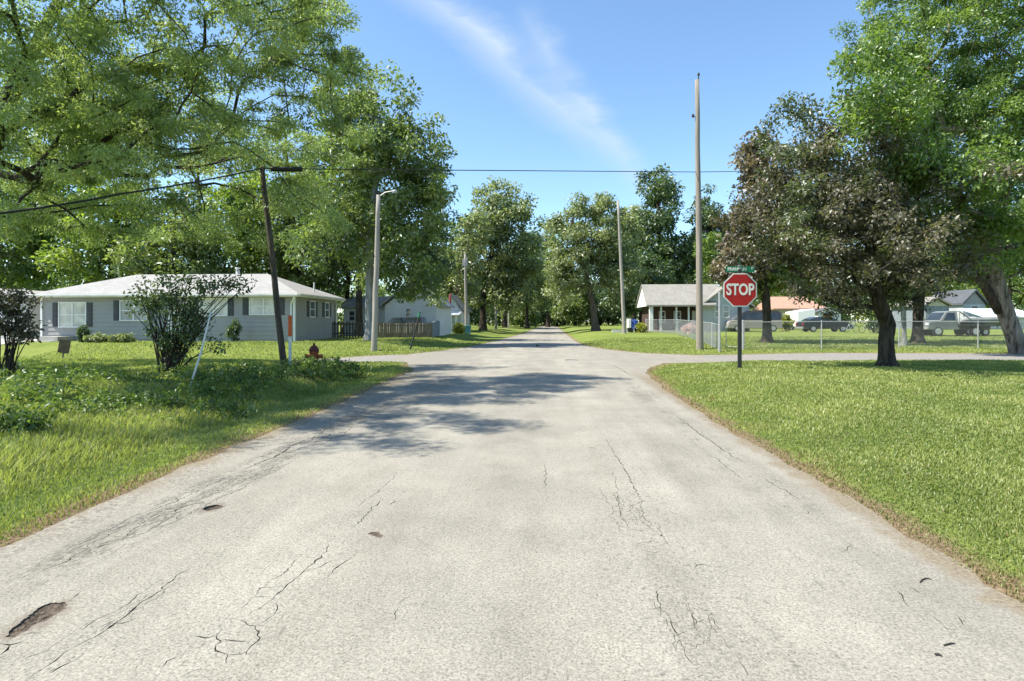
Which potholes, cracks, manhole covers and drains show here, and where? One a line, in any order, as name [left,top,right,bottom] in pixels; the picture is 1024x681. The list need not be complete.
crack [25,570,186,679]
crack [675,415,743,477]
crack [654,587,748,677]
crack [24,424,351,577]
crack [164,537,353,677]
pothole [5,602,68,638]
crack [588,440,667,553]
